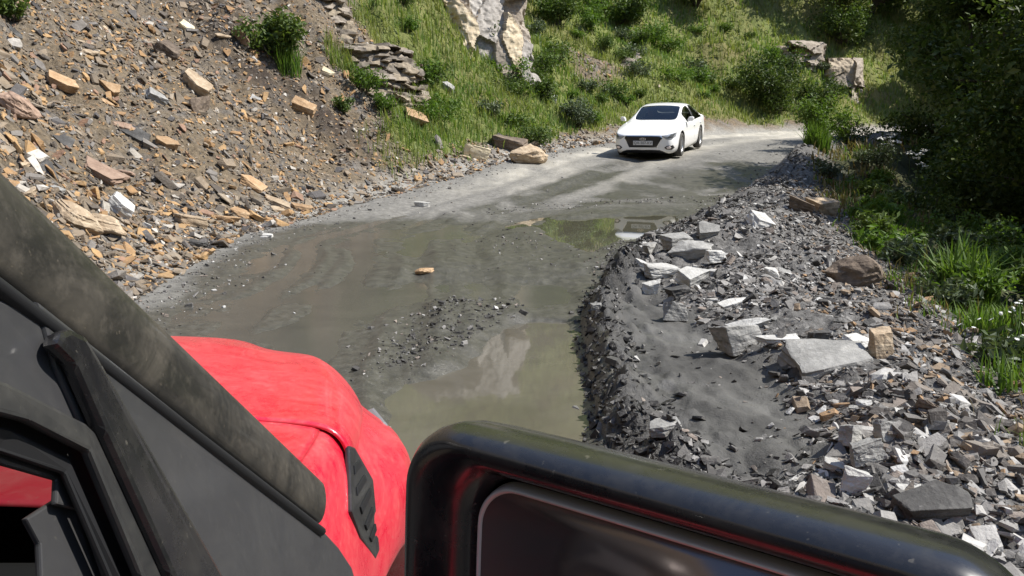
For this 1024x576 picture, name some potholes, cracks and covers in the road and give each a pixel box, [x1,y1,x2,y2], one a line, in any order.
pothole [362,310,618,461]
pothole [505,209,696,253]
